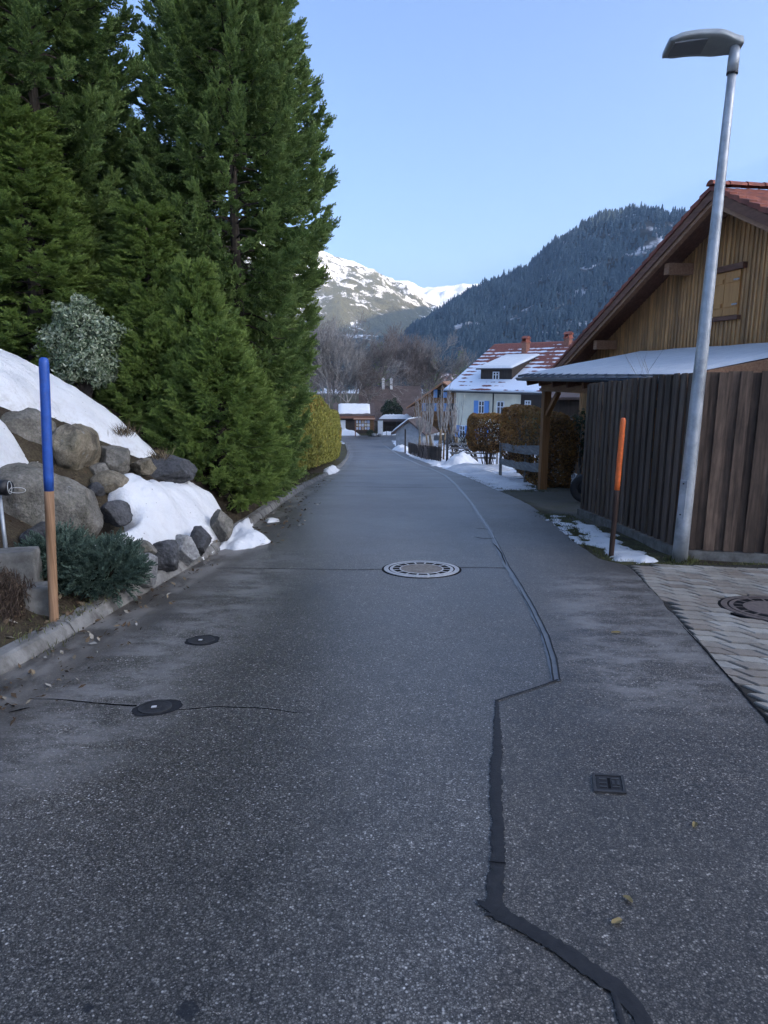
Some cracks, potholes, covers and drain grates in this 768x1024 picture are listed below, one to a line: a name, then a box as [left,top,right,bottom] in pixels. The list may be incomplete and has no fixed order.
utility cover [184,635,220,646]
manhole cover [718,596,768,622]
manhole cover [382,561,462,578]
utility cover [131,699,183,717]
